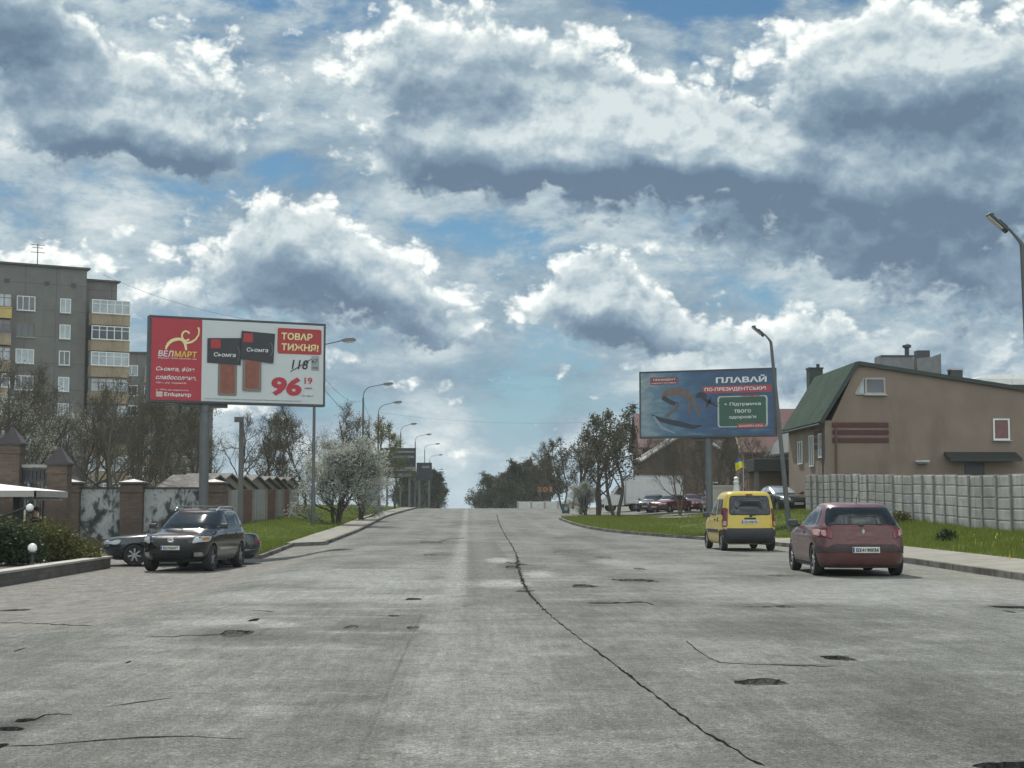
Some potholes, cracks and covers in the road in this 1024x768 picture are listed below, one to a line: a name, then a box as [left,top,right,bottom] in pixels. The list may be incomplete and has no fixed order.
crack [497,516,765,766]
crack [4,736,234,747]
